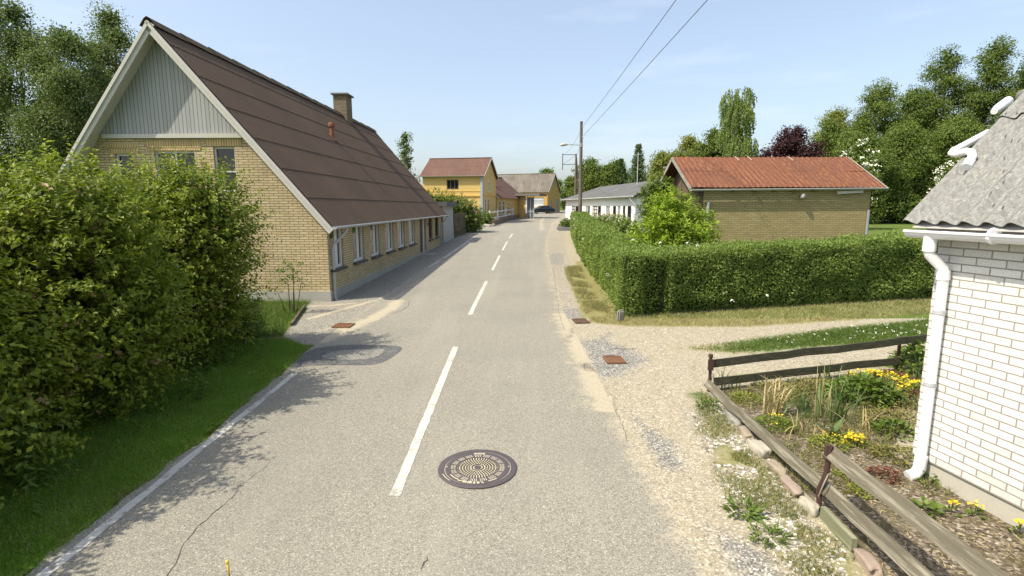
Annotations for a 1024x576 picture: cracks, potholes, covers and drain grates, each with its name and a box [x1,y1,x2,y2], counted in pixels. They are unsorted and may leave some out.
crack [167,464,268,576]
drain grate [602,356,627,364]
manhole cover [438,449,517,489]
